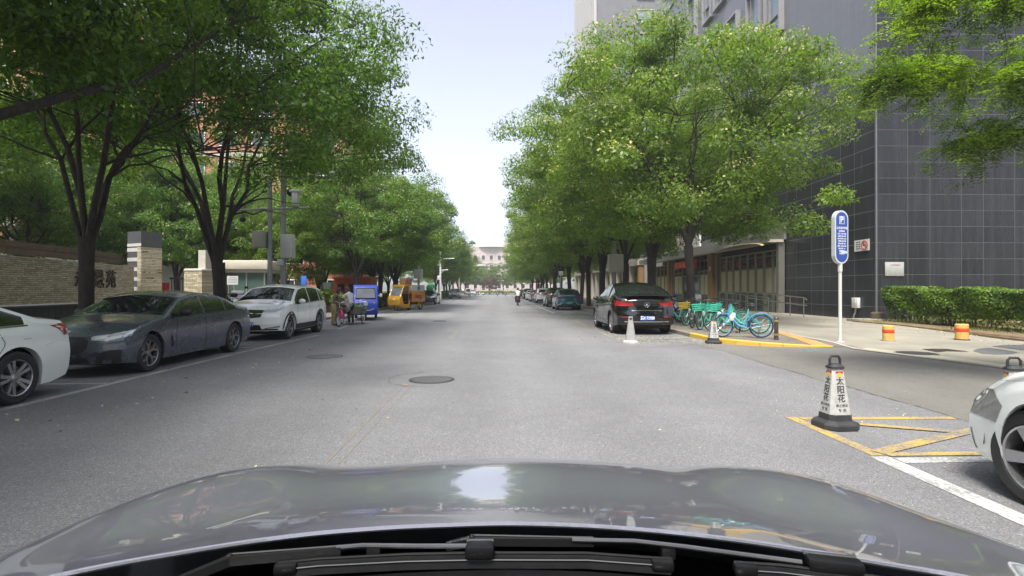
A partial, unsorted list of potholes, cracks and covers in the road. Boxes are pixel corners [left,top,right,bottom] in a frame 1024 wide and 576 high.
manhole cover [409,376,454,384]
